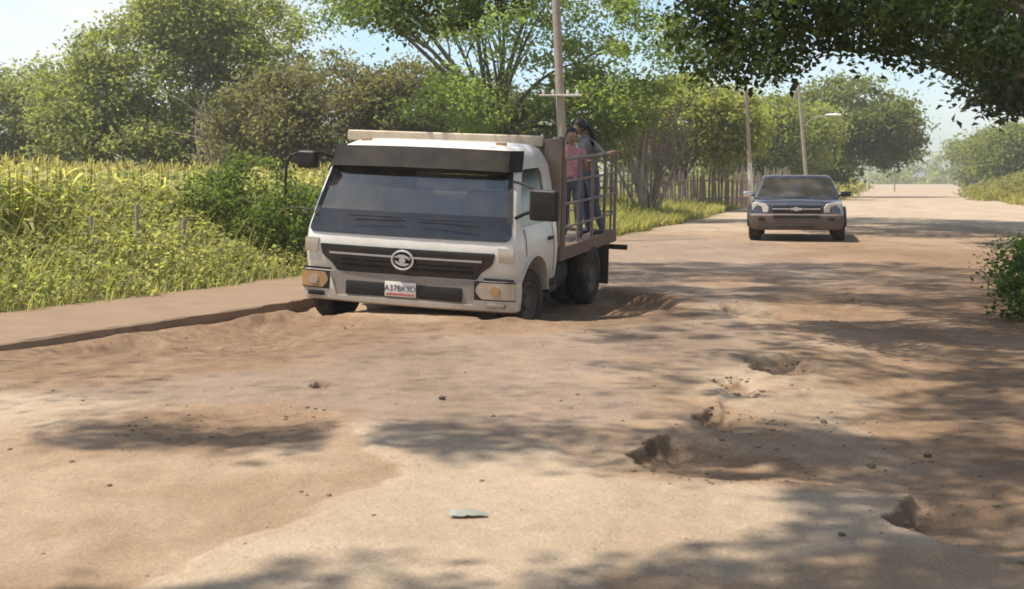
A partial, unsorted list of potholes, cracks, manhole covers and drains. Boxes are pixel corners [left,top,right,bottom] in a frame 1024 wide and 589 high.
pothole [623,432,811,484]
pothole [740,353,832,376]
pothole [710,374,778,399]
pothole [689,406,794,437]
